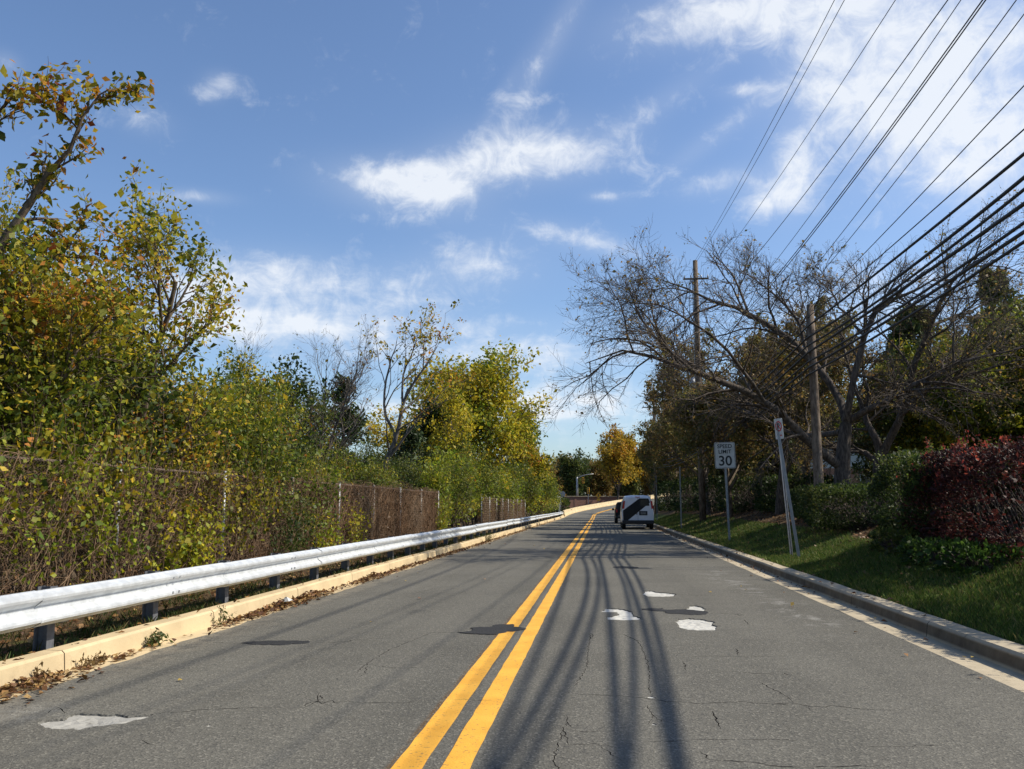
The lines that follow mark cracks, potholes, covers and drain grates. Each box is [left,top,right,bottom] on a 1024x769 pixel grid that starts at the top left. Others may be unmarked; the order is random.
crack [552,715,622,769]
crack [152,693,418,715]
crack [568,633,881,767]
